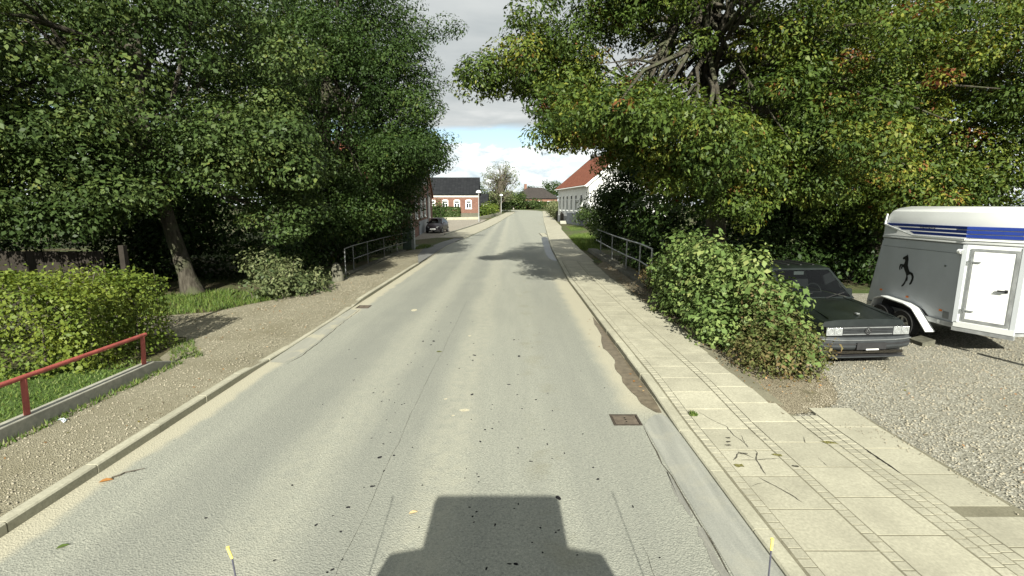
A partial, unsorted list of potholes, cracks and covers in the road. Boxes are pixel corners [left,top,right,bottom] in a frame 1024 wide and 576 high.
crack [703,414,803,503]
